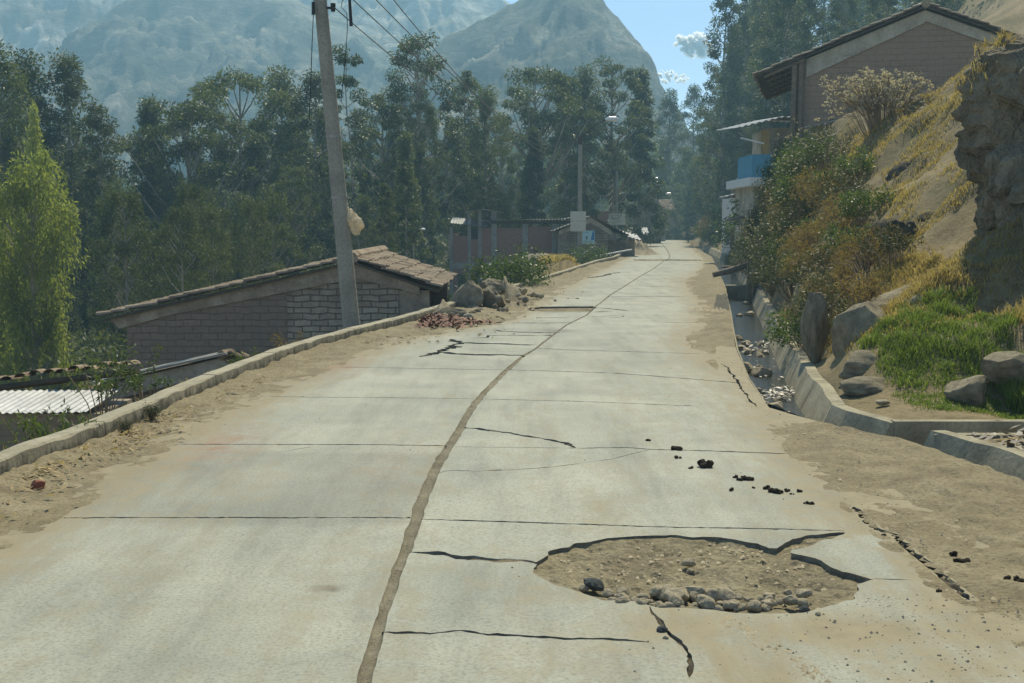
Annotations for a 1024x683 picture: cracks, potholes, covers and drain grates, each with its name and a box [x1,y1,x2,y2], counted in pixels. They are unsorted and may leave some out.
crack [851,507,970,600]
crack [419,317,560,357]
crack [439,427,651,473]
crack [410,551,538,564]
crack [382,607,694,677]
pothole [533,532,872,614]
crack [722,364,757,407]
